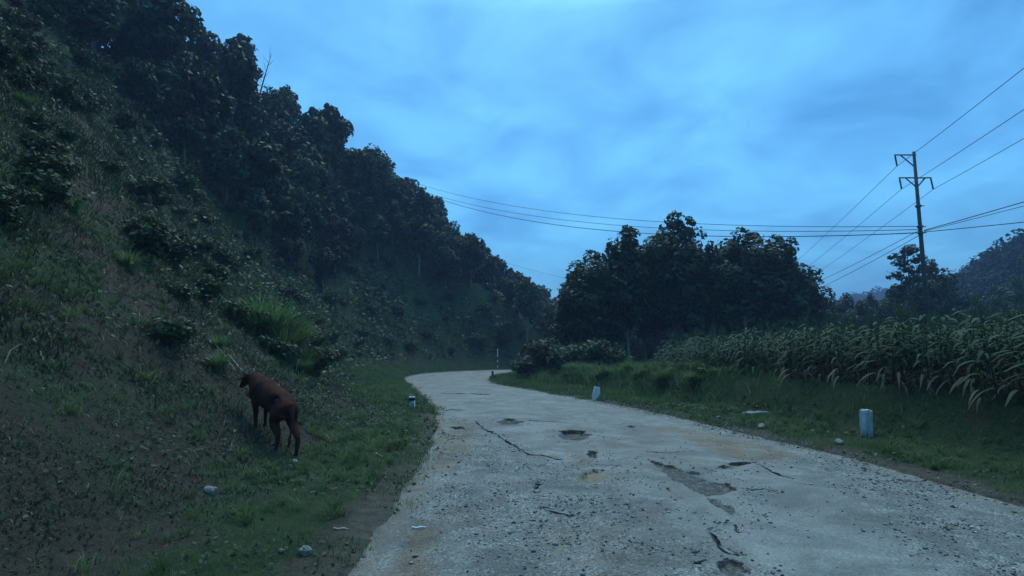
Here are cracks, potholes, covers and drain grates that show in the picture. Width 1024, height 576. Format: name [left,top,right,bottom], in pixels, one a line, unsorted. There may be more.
pothole [703,554,767,576]
pothole [562,468,624,489]
pothole [579,450,606,460]
pothole [548,430,599,442]
crack [440,393,565,459]
crack [692,512,745,564]
crack [740,462,795,492]
pothole [489,418,529,426]
pothole [638,459,758,525]
